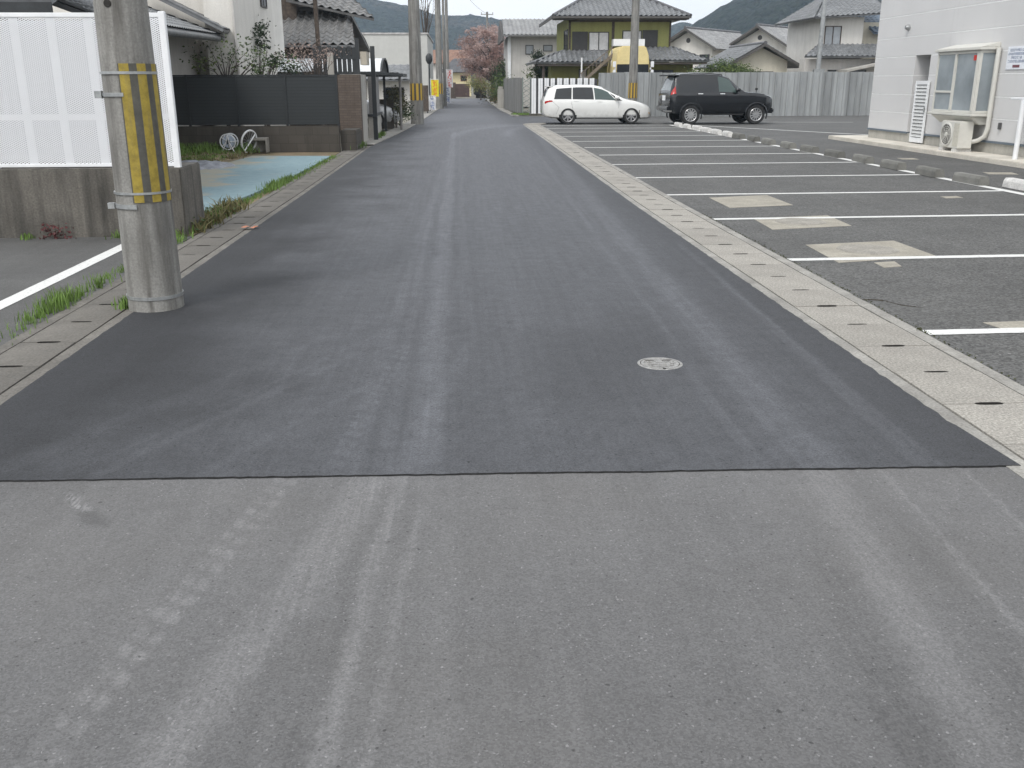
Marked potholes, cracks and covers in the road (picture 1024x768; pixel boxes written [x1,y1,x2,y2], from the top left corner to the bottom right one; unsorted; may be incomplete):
manhole cover [637,357,683,370]
crack [862,299,916,307]
